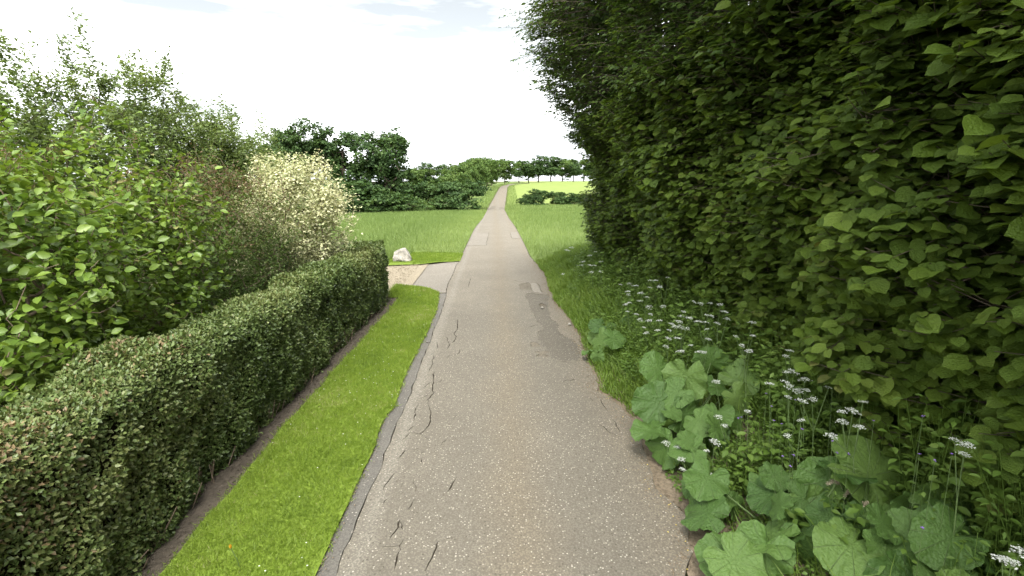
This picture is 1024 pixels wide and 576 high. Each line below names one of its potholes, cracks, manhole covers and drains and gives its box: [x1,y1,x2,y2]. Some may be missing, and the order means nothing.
crack [414,320,460,433]
